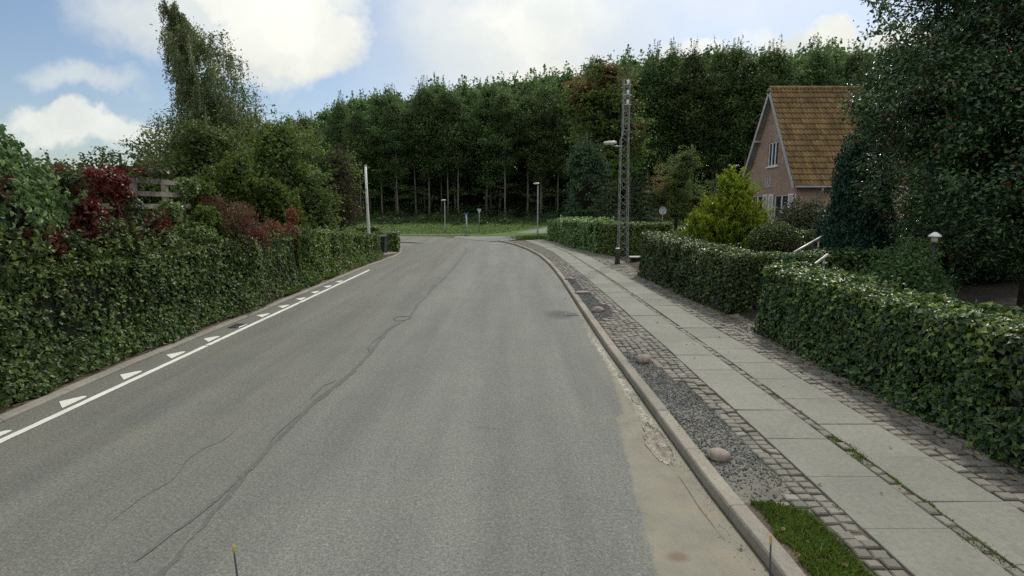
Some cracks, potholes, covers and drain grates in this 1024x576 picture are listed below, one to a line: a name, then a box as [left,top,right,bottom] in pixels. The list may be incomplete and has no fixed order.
crack [113,247,512,576]
